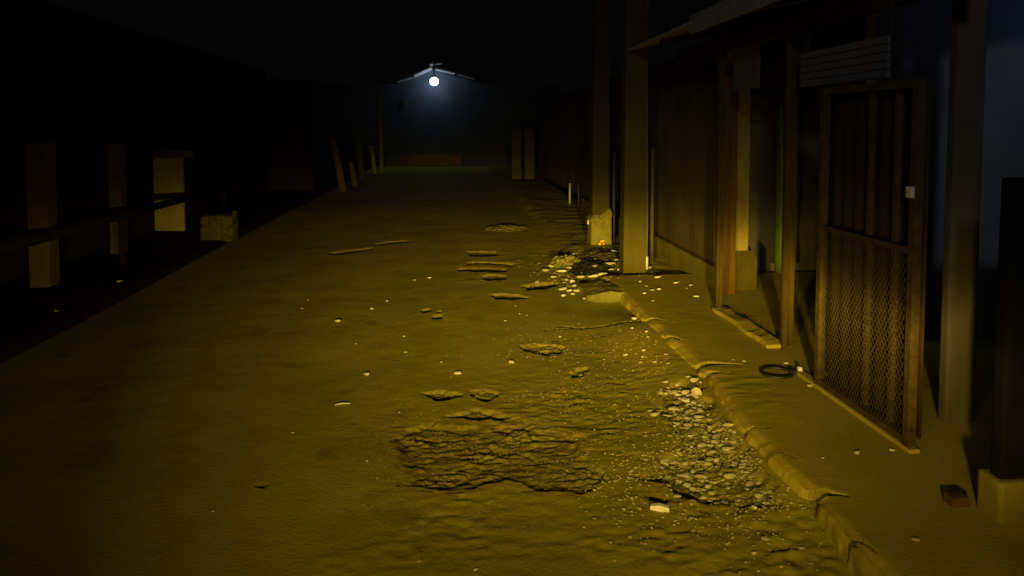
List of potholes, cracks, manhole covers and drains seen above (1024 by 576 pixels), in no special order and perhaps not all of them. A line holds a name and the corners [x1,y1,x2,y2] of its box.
pothole [436,404,520,429]
pothole [509,341,573,358]
pothole [472,272,517,283]
crack [537,319,648,344]
pothole [462,387,506,405]
pothole [622,376,793,516]
pothole [456,249,509,259]
pothole [456,260,526,269]
pothole [413,388,470,403]
pothole [561,364,597,380]
pothole [508,279,570,294]
pothole [449,264,517,274]
